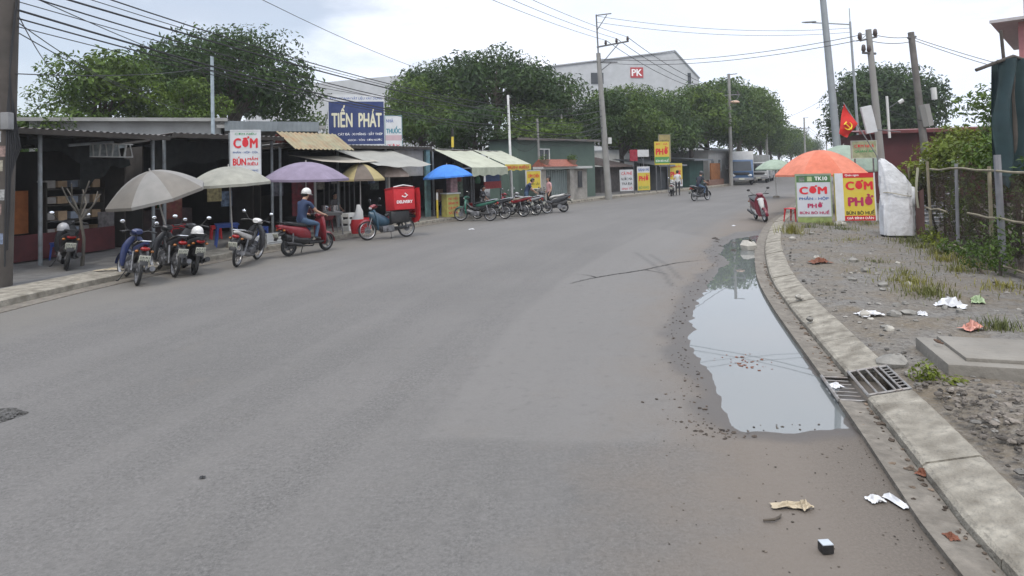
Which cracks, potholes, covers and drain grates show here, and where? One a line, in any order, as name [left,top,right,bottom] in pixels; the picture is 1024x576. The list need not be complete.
drain grate [820,364,912,404]
